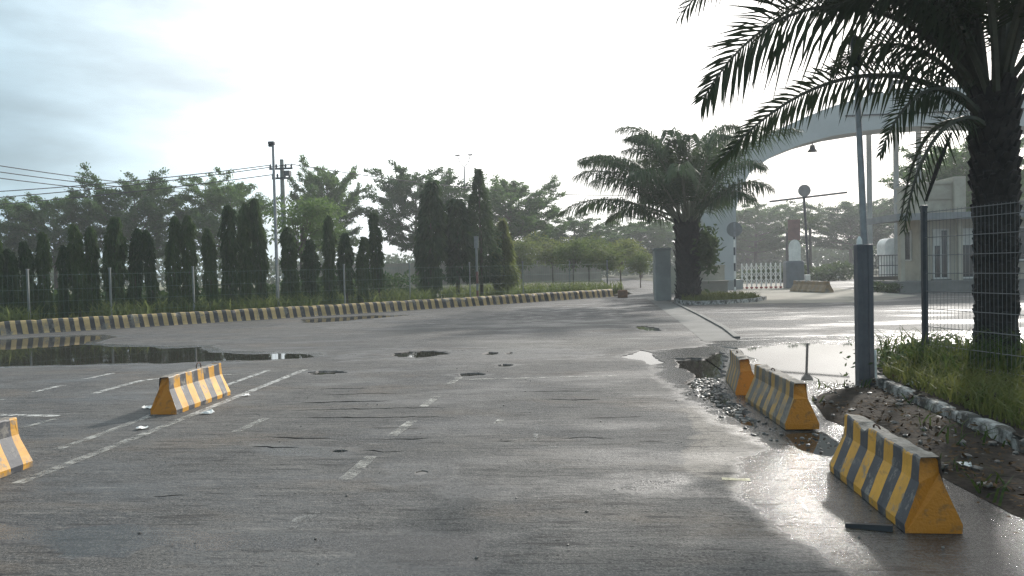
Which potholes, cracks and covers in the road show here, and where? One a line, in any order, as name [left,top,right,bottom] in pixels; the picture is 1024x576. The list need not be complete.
crack [252,437,333,448]
crack [535,391,597,400]
crack [293,388,441,452]
pothole [673,351,757,426]
